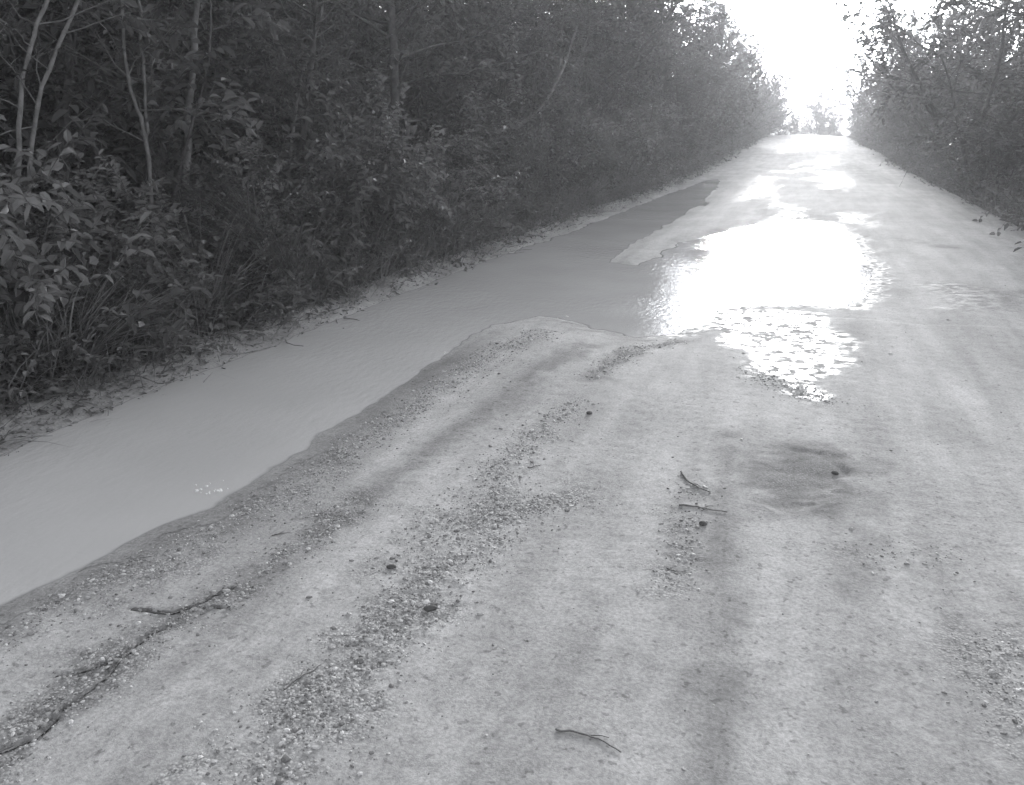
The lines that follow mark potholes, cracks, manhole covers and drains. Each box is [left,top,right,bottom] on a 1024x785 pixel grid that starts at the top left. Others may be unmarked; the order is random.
crack [0,586,236,754]
pothole [0,178,896,625]
